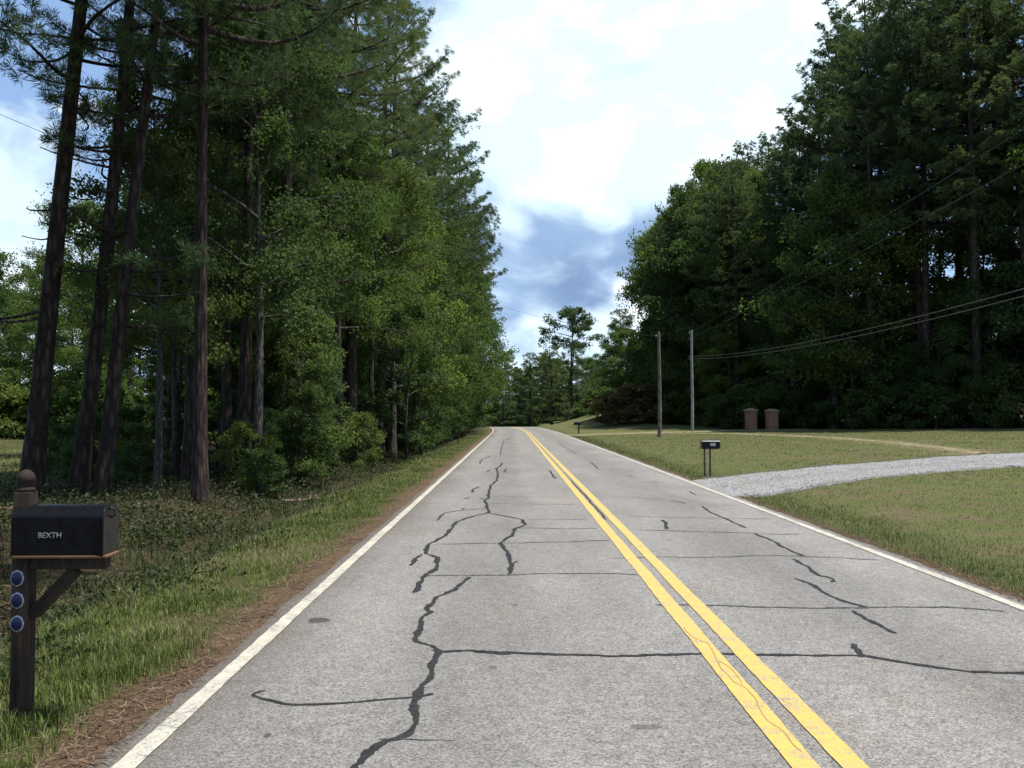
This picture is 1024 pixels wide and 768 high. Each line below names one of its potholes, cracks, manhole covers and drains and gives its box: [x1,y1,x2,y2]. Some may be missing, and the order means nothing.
crack [462,438,520,509]
crack [427,555,874,576]
crack [456,528,603,544]
